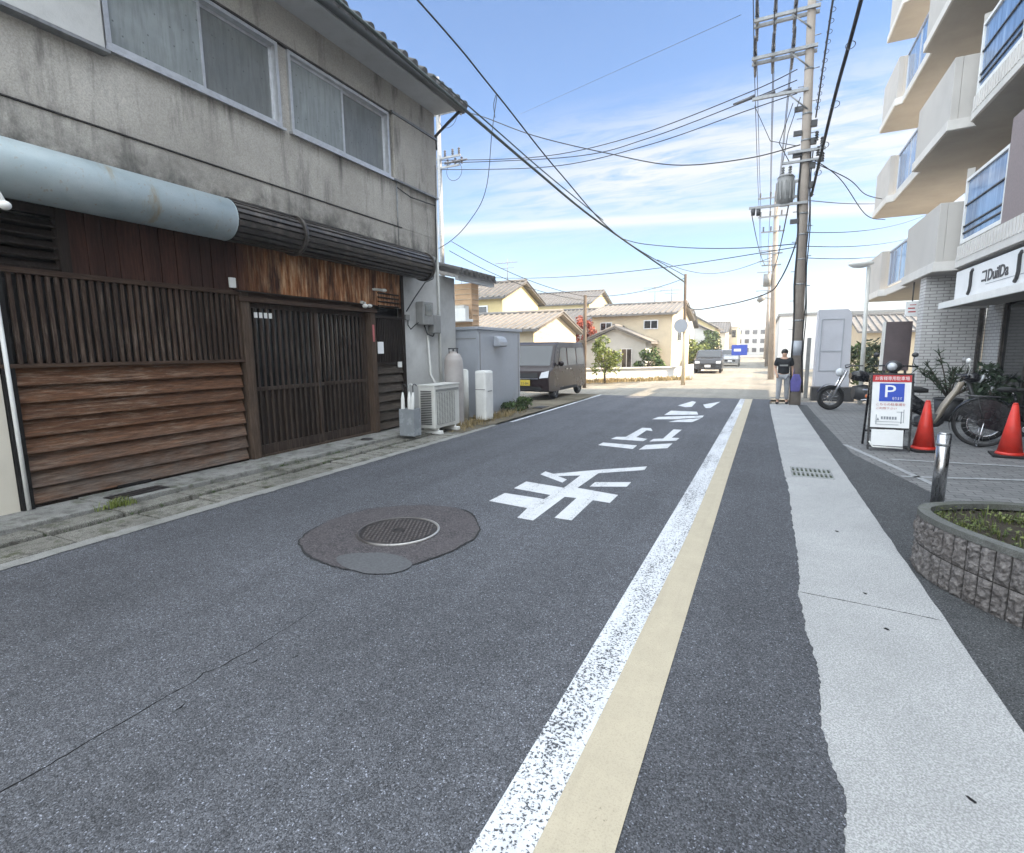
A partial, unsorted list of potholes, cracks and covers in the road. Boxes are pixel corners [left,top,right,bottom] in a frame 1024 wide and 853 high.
manhole cover [356,517,440,546]
drain grate [790,466,835,480]
crack [0,609,316,793]
